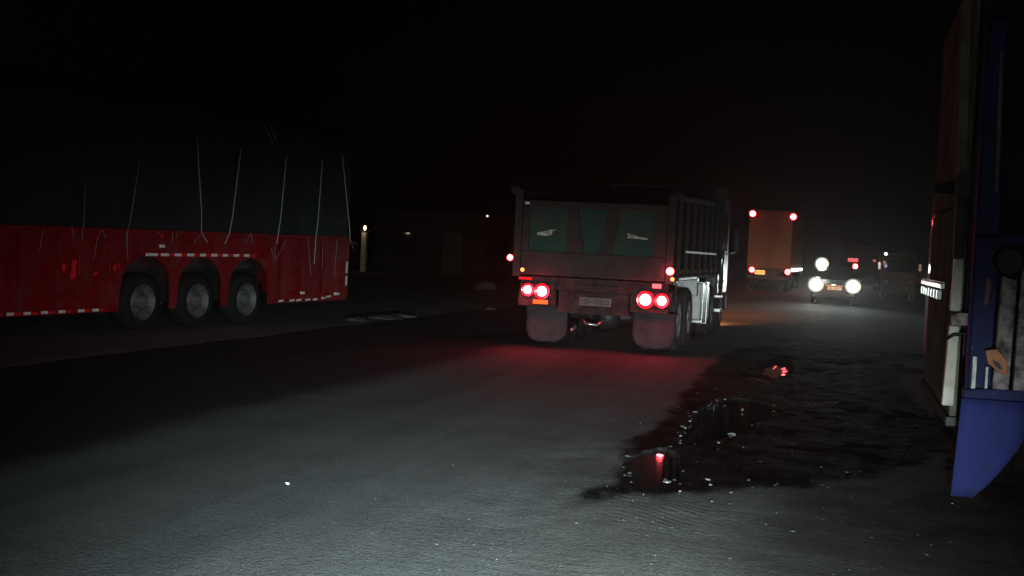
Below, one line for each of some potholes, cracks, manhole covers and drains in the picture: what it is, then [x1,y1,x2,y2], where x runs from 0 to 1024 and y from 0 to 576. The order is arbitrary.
pothole [742,357,795,383]
pothole [676,398,778,445]
pothole [621,446,685,485]
